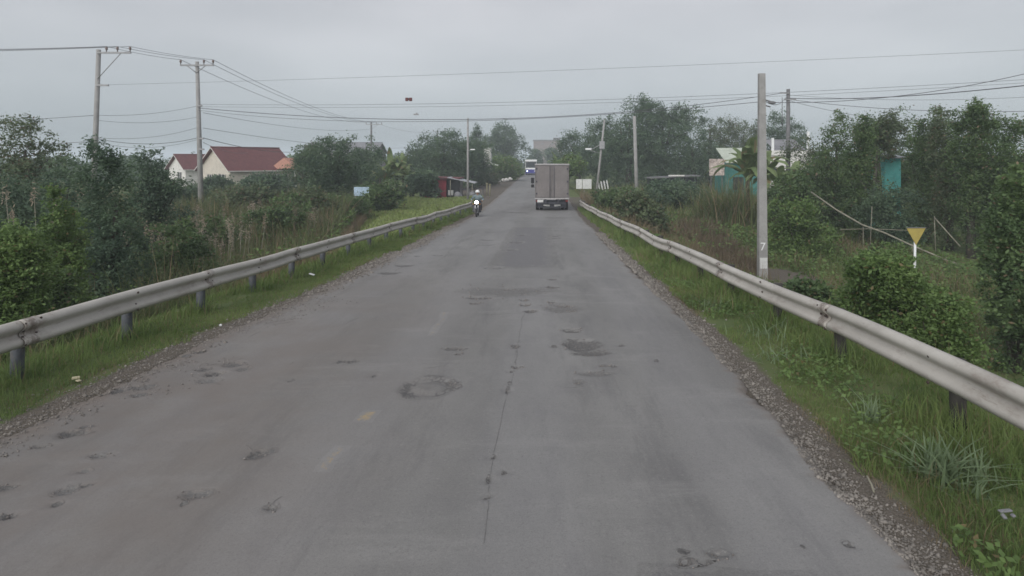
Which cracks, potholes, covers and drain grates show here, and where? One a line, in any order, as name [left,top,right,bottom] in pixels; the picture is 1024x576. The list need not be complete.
pothole [396,374,463,401]
crack [484,313,525,540]
pothole [245,448,269,460]
pothole [57,429,95,439]
pothole [177,488,216,501]
pothole [259,502,281,514]
pothole [560,338,605,354]
pothole [48,483,82,497]
pothole [703,548,732,561]
pothole [674,557,698,568]
